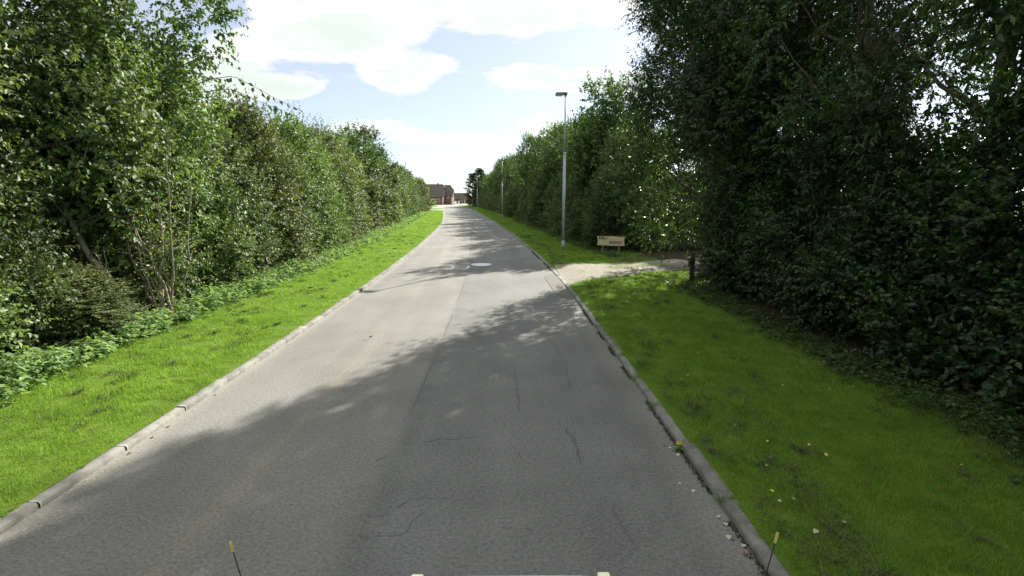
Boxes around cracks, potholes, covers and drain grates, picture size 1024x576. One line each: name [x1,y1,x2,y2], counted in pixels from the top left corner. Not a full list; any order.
crack [513,369,521,413]
crack [358,497,453,538]
crack [564,426,581,461]
crack [611,501,638,549]
